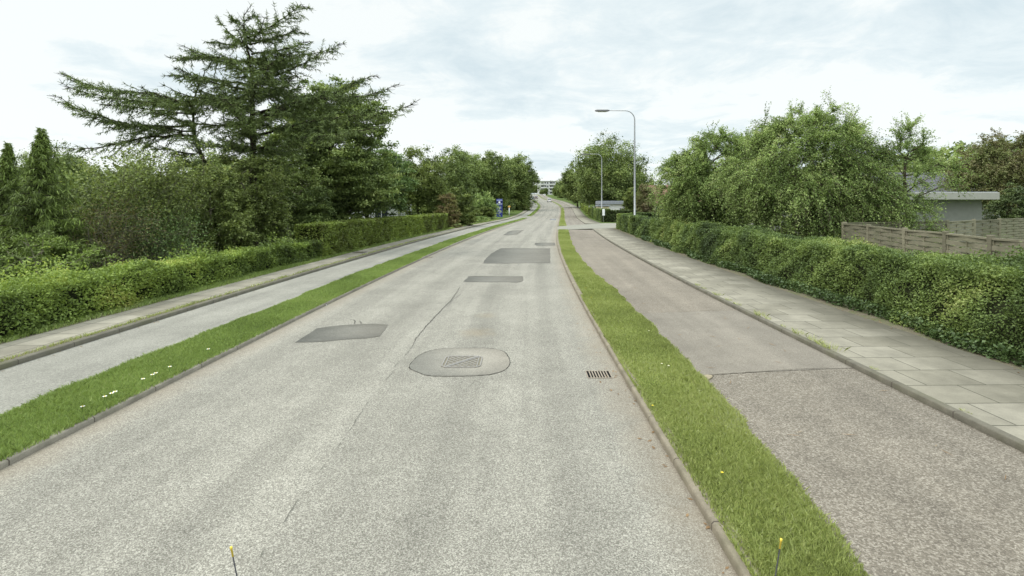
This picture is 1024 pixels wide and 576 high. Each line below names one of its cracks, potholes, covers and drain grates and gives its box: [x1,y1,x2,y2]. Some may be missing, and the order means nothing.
crack [260,402,368,557]
manhole cover [441,356,483,368]
crack [381,287,460,385]
